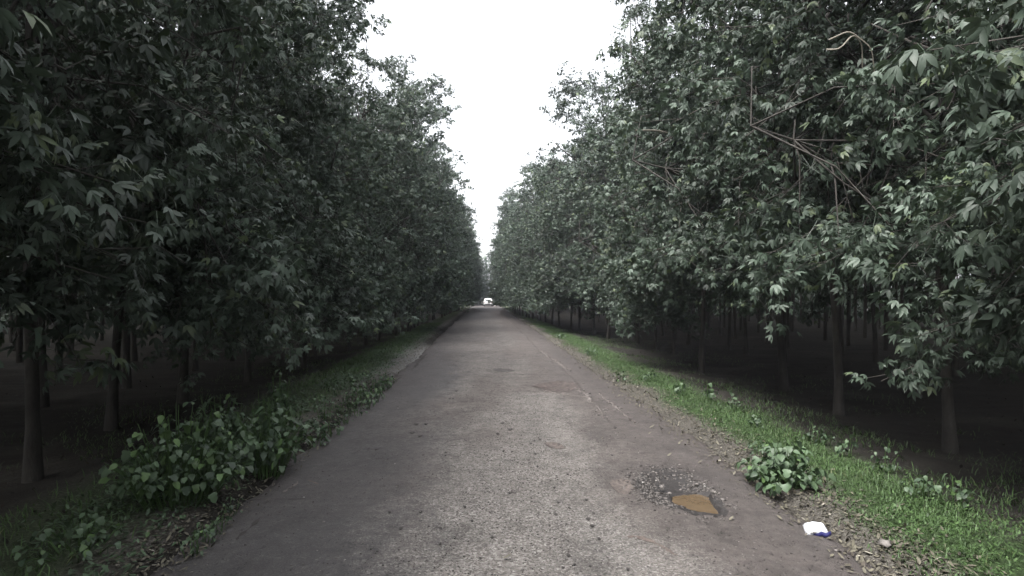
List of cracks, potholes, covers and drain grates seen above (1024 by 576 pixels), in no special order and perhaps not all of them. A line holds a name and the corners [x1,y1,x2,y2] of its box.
pothole [635,468,729,516]
